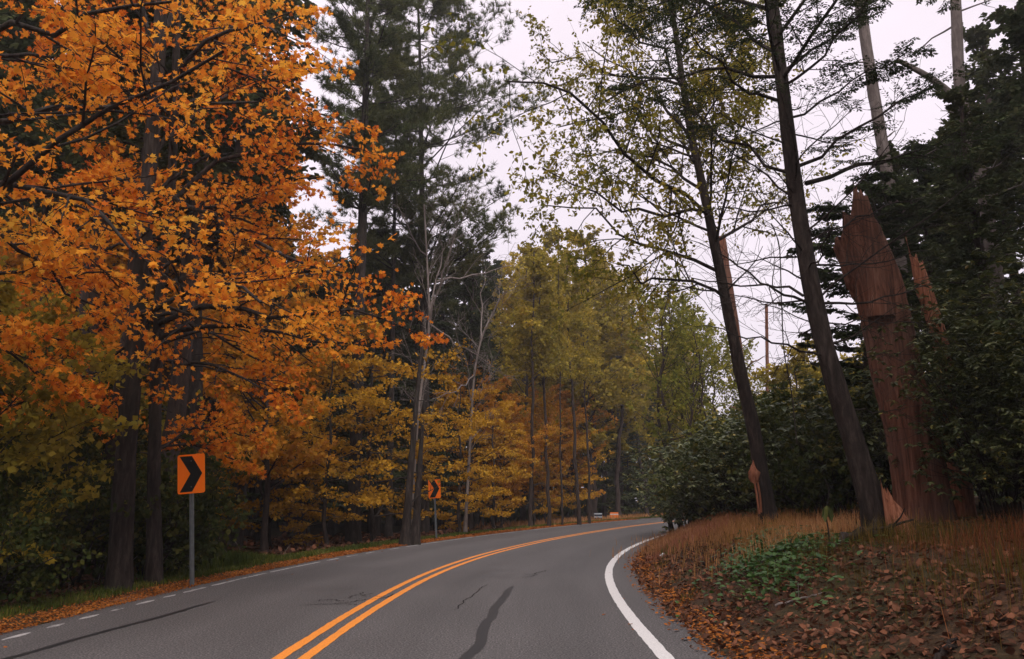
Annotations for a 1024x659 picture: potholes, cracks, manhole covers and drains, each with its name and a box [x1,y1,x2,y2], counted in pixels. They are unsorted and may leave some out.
crack [314,592,393,605]
